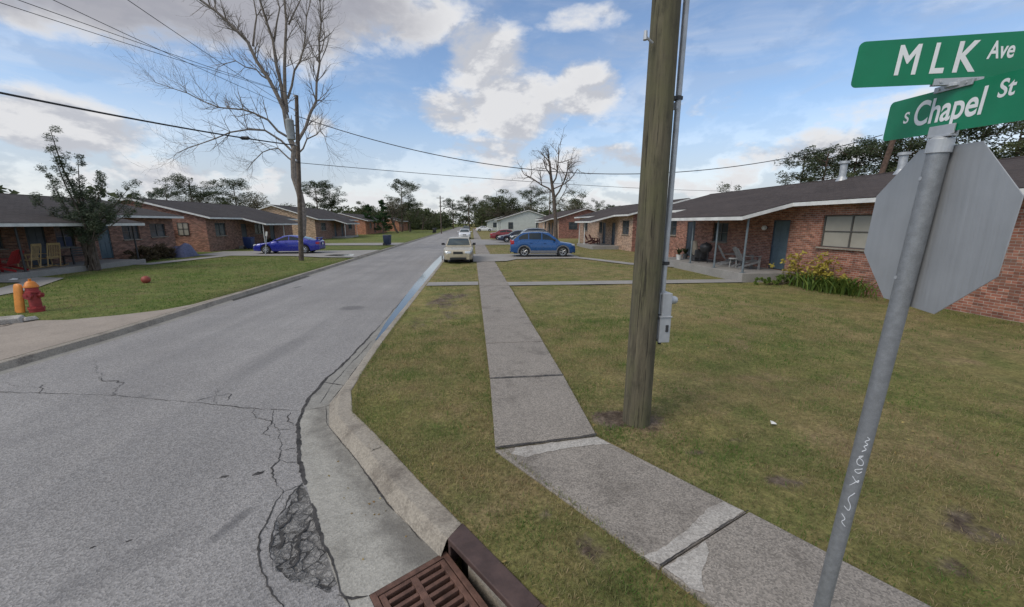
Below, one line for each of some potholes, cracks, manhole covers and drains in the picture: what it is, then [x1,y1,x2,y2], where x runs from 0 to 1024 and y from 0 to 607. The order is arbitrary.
crack [14,295,406,607]
drain grate [370,523,545,607]
pothole [271,482,337,593]
